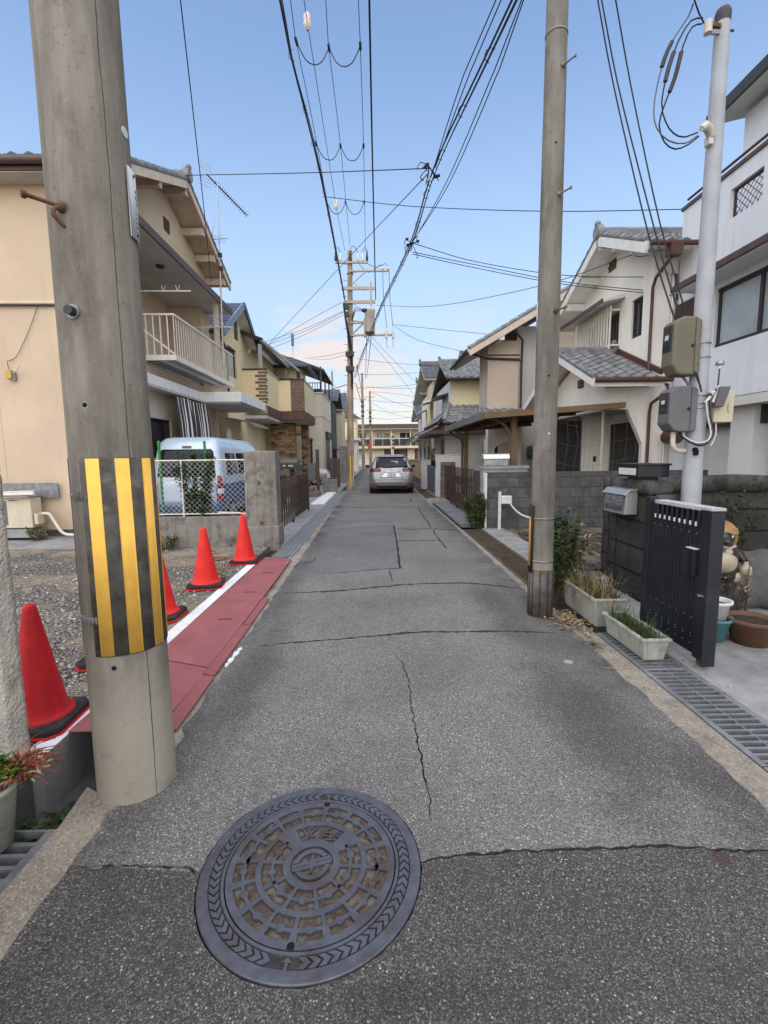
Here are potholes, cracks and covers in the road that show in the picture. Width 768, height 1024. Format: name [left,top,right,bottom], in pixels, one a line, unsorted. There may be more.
crack [257,630,549,647]
drain grate [641,668,768,769]
manhole cover [195,788,421,989]
crack [420,844,768,868]
crack [397,657,432,821]
crack [298,570,513,593]
crack [82,864,201,875]
